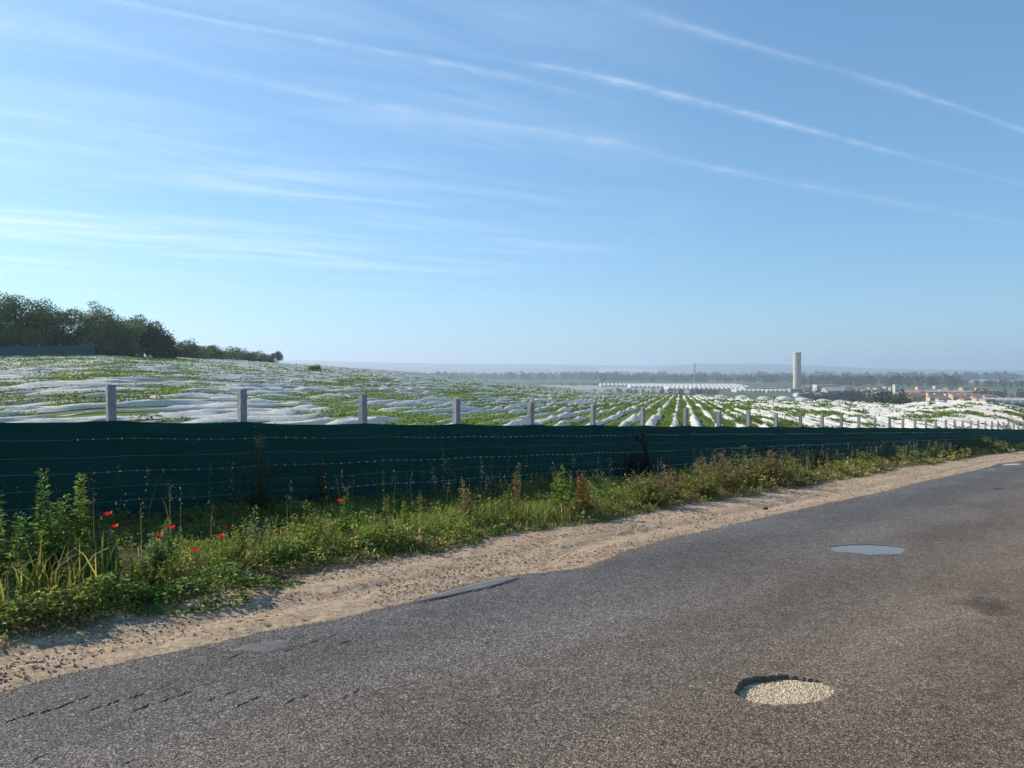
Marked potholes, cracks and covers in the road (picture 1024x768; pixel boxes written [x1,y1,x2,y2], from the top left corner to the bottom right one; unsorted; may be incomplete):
crack [284,634,350,652]
crack [4,684,262,724]
pothole [829,544,906,555]
pothole [708,660,877,724]
